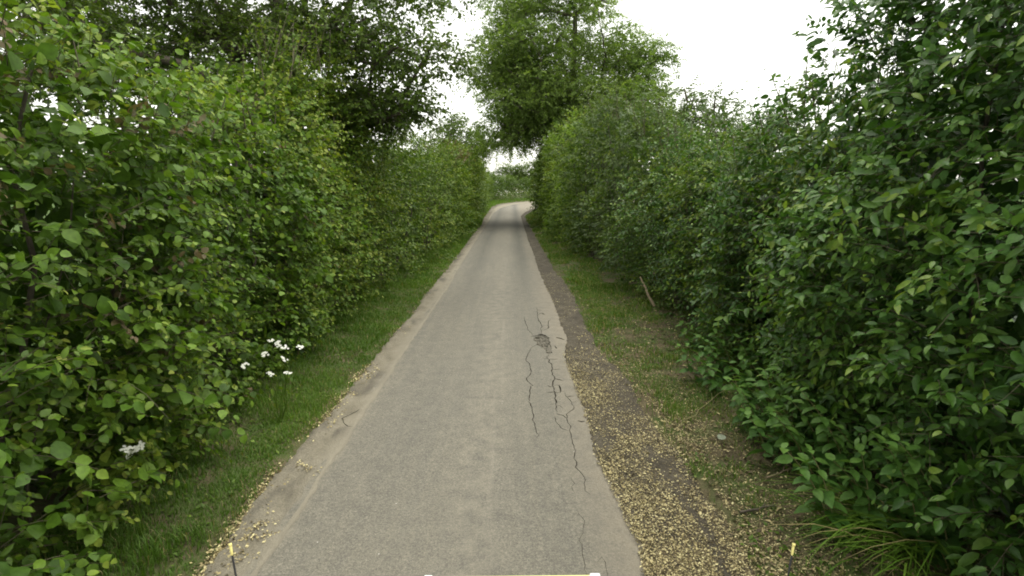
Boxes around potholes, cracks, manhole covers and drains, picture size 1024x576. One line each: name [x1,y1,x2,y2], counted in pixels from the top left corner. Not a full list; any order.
pothole [533,334,552,354]
crack [524,309,588,493]
